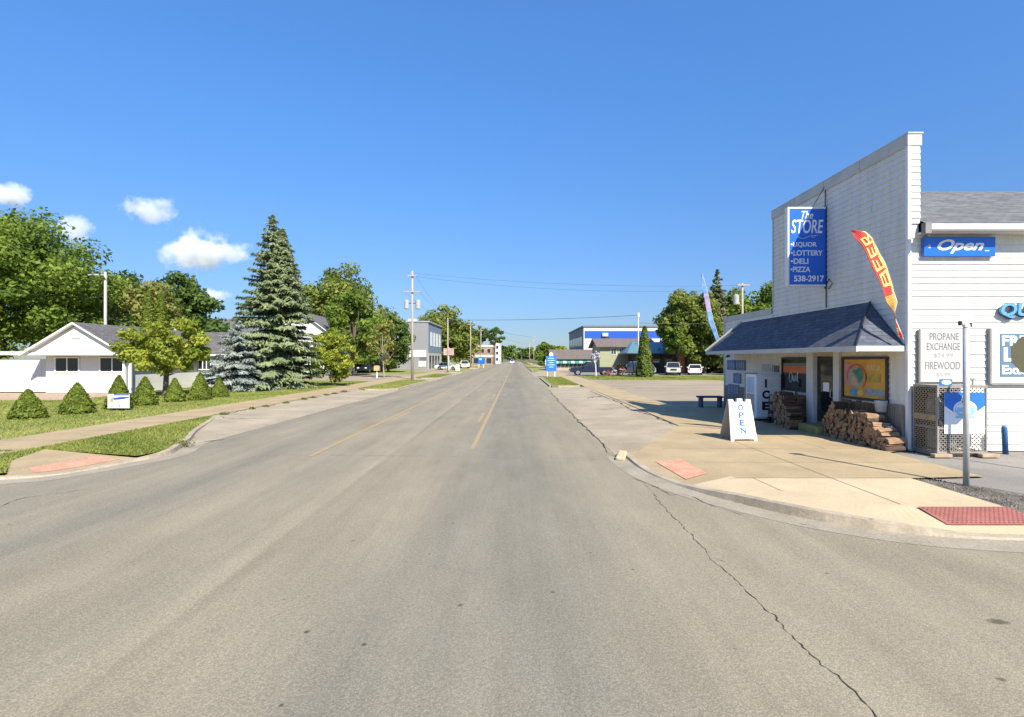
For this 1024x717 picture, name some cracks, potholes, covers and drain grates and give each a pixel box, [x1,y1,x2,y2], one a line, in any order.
crack [656,496,877,717]
